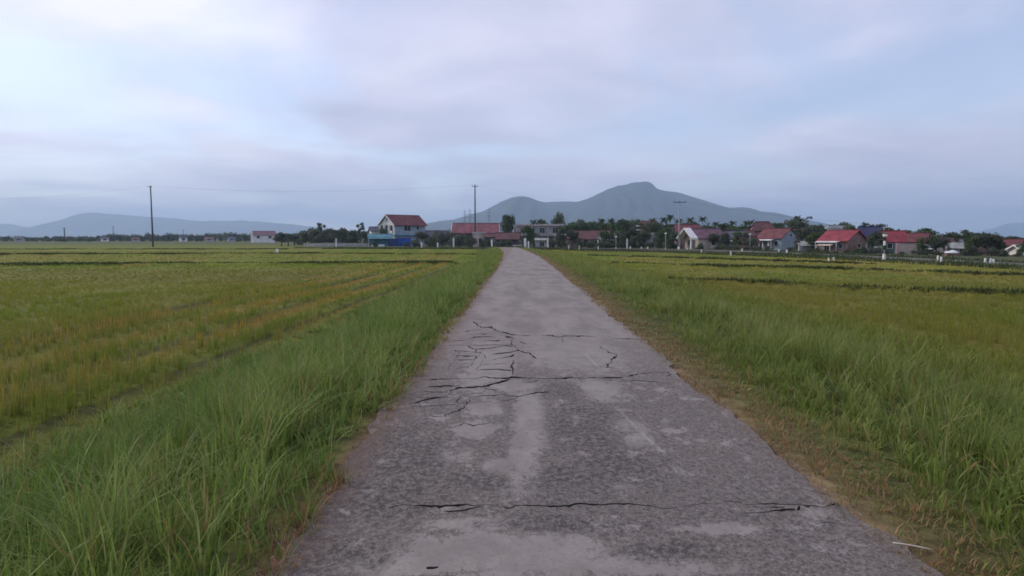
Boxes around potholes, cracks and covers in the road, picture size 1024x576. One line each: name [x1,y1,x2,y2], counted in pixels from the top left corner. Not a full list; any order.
crack [389,501,835,524]
crack [408,322,672,429]
